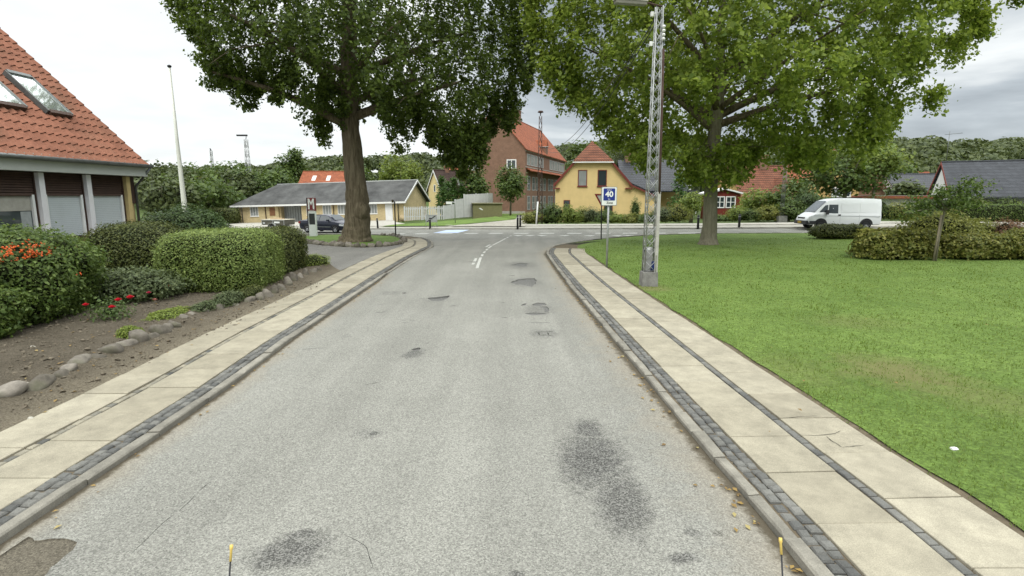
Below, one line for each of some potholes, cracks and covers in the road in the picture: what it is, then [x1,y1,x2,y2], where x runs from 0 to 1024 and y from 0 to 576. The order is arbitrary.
pothole [511,278,537,287]
